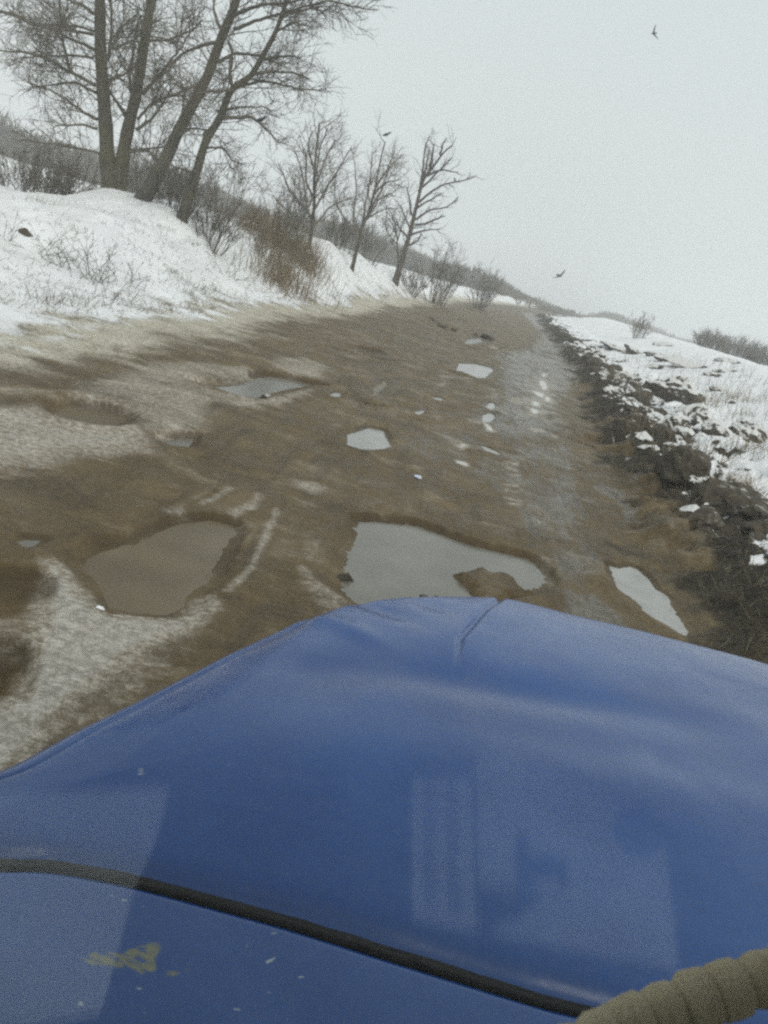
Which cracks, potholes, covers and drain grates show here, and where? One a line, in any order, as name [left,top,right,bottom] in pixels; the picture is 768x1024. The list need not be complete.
pothole [61,498,285,638]
pothole [578,550,732,648]
pothole [9,389,170,434]
pothole [293,501,589,610]
pothole [159,363,339,407]
